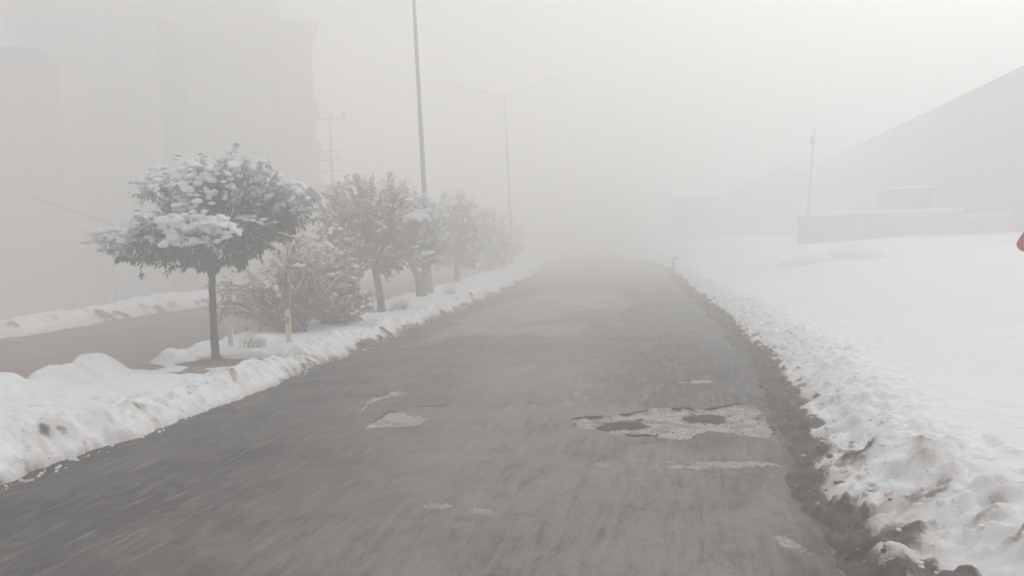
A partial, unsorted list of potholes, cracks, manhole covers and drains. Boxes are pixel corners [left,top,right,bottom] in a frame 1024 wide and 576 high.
pothole [571,403,777,440]
